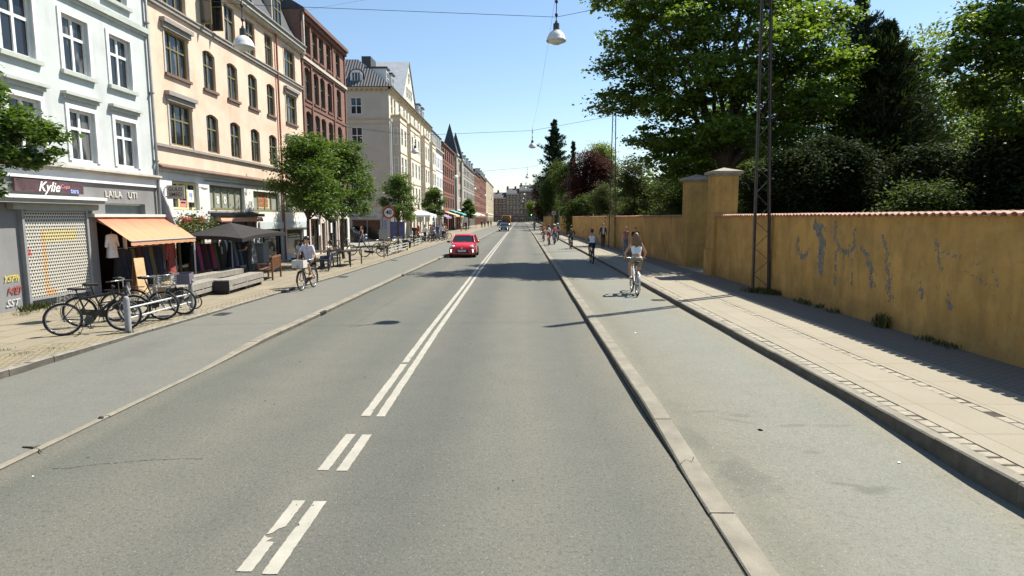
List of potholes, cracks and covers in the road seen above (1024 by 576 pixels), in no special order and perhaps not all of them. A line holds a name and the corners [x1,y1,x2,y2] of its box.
crack [53,458,202,469]
